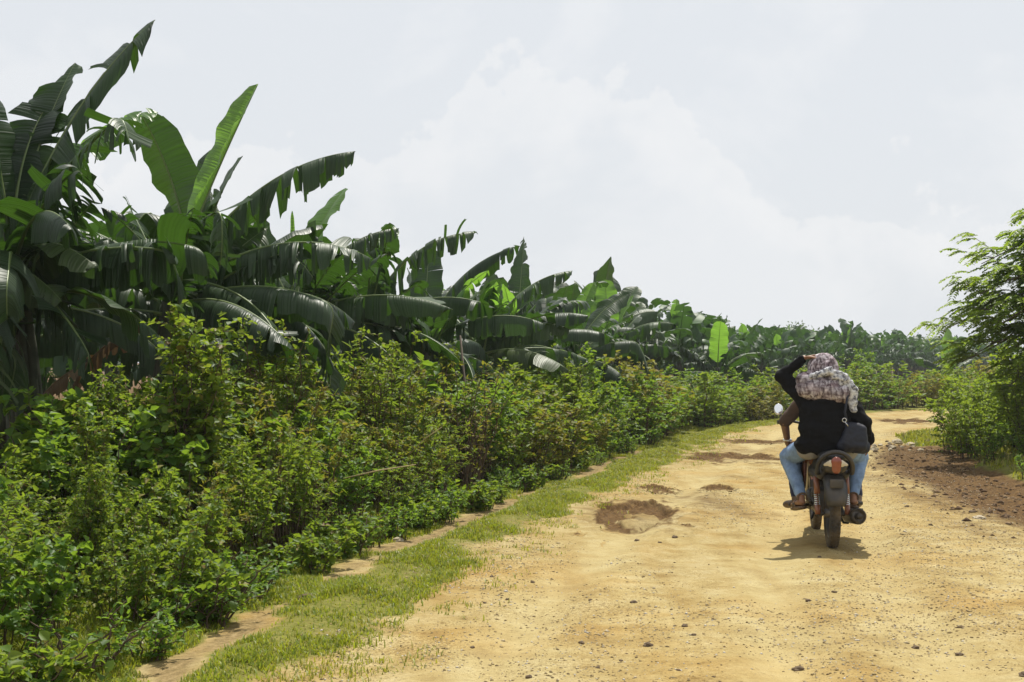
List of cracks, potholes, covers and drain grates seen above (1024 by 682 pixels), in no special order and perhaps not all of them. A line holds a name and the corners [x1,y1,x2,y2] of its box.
pothole [665,451,781,466]
pothole [695,482,737,493]
pothole [564,493,702,547]
pothole [638,483,682,496]
